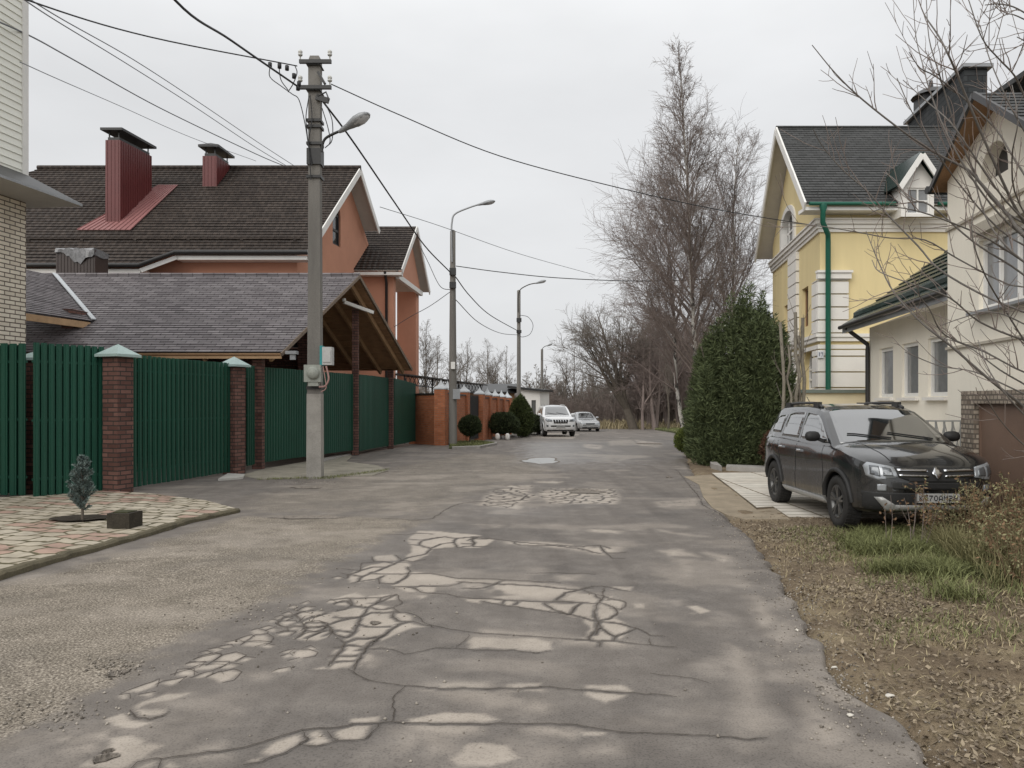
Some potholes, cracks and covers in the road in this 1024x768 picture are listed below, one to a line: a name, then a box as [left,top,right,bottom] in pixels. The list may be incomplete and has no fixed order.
crack [119,485,767,768]
pothole [93,752,120,764]
